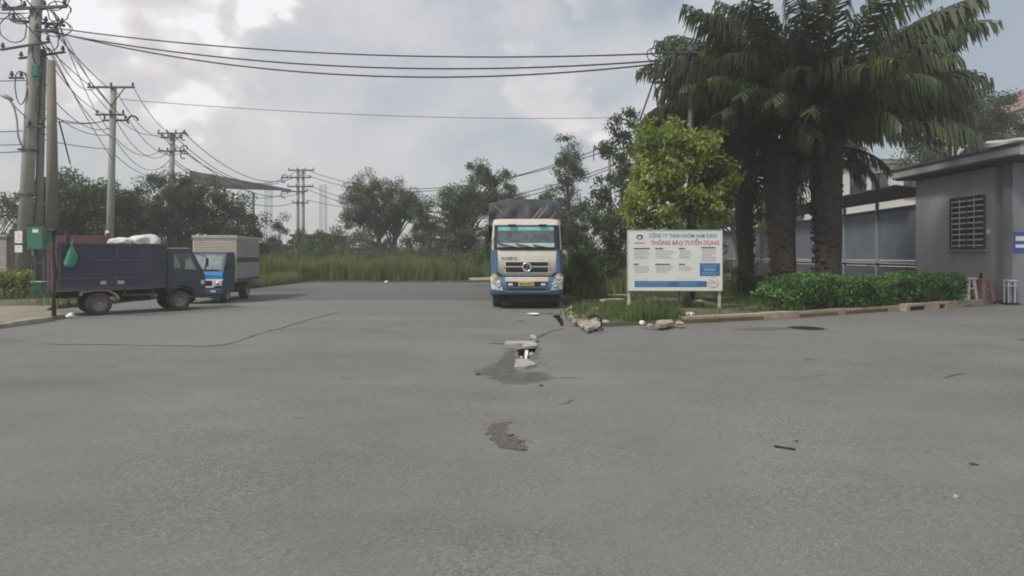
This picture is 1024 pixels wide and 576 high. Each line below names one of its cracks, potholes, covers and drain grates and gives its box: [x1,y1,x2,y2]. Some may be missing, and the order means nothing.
pothole [485,422,527,451]
